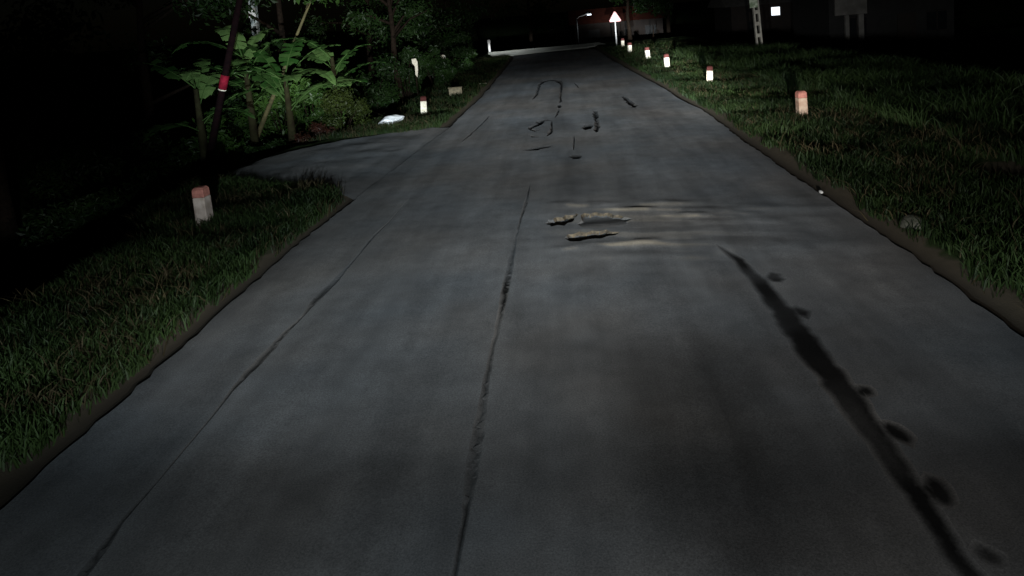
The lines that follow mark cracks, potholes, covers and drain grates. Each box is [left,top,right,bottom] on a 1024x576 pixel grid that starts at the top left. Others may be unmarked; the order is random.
pothole [565,230,619,241]
crack [527,79,579,151]
crack [622,96,639,108]
pothole [578,212,632,228]
crack [592,110,601,132]
crack [77,199,409,576]
pothole [546,213,578,227]
crack [451,184,531,576]
